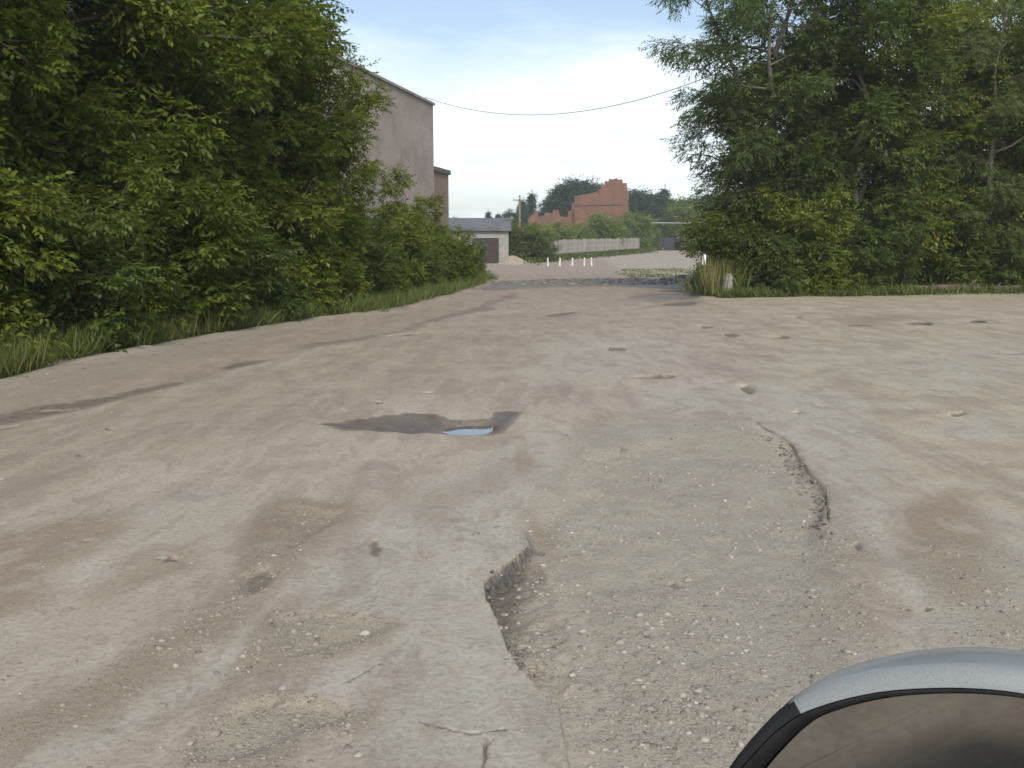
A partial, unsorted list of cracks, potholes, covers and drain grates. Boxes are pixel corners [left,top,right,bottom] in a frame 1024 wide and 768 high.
crack [0,250,1024,768]
